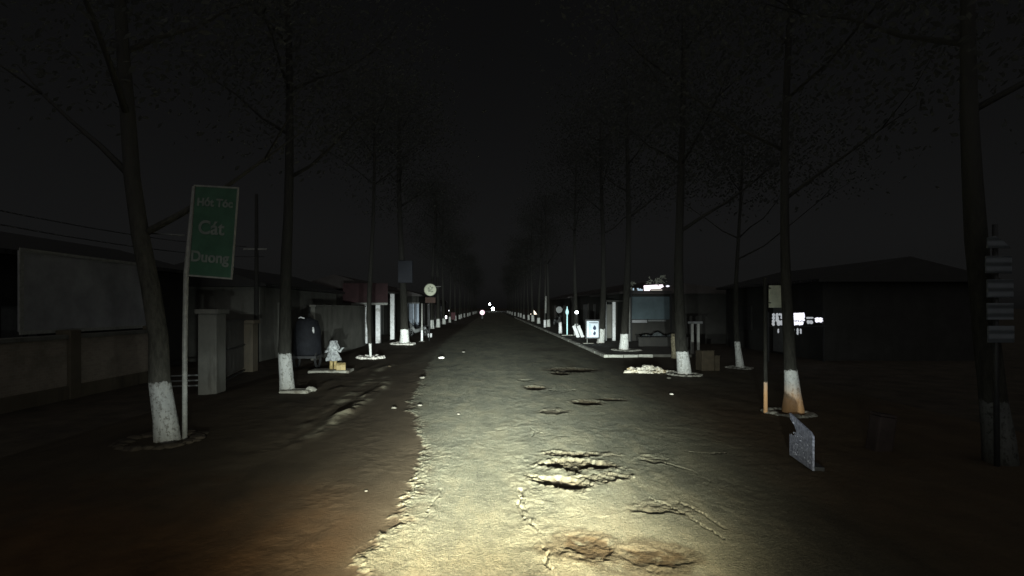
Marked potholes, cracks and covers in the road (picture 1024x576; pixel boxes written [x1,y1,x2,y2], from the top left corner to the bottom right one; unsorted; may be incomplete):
crack [639,449,736,544]
pothole [522,449,636,493]
pothole [539,366,604,375]
pothole [568,397,629,407]
crack [512,486,566,576]
